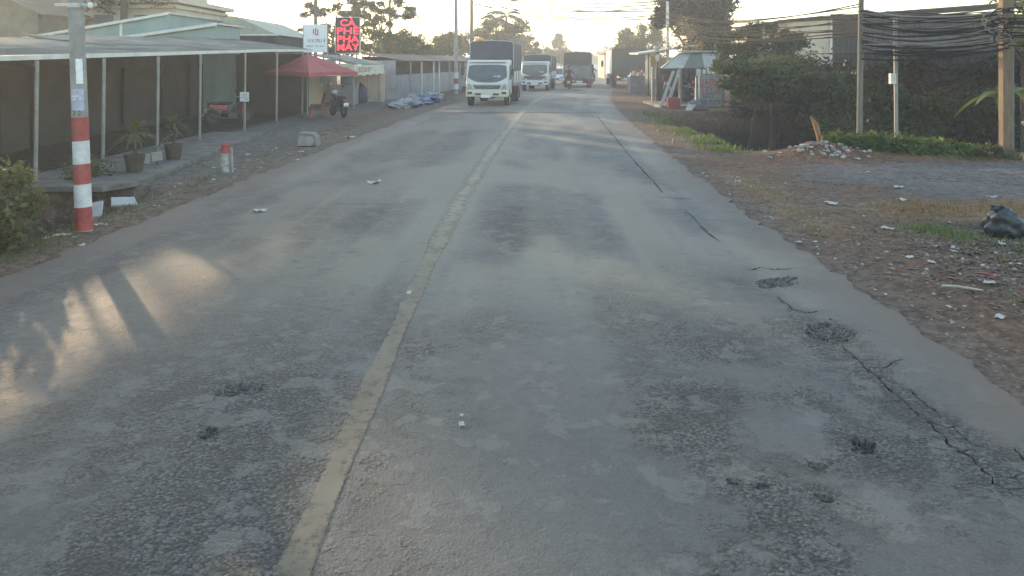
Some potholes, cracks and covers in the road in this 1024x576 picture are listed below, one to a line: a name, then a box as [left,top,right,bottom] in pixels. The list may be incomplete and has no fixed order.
pothole [805,461,832,471]
pothole [197,426,219,440]
pothole [210,381,272,400]
pothole [755,275,799,290]
pothole [813,493,839,504]
pothole [803,318,870,346]
crack [842,347,1024,490]
crack [669,197,722,243]
pothole [838,435,881,457]
